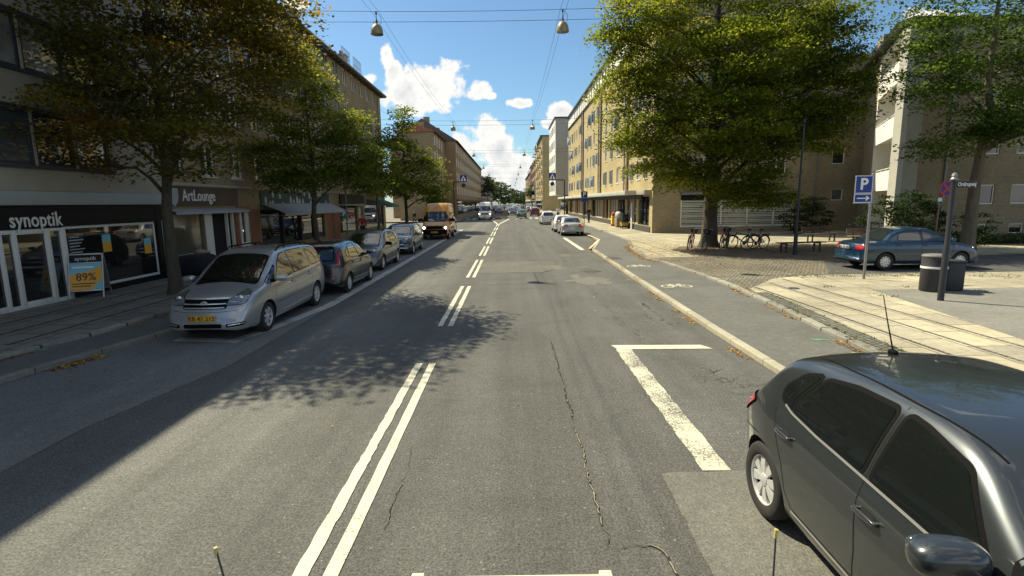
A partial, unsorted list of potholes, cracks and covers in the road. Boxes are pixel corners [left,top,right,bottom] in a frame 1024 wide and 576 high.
crack [550,340,679,576]
crack [695,365,763,395]
crack [381,445,412,534]
